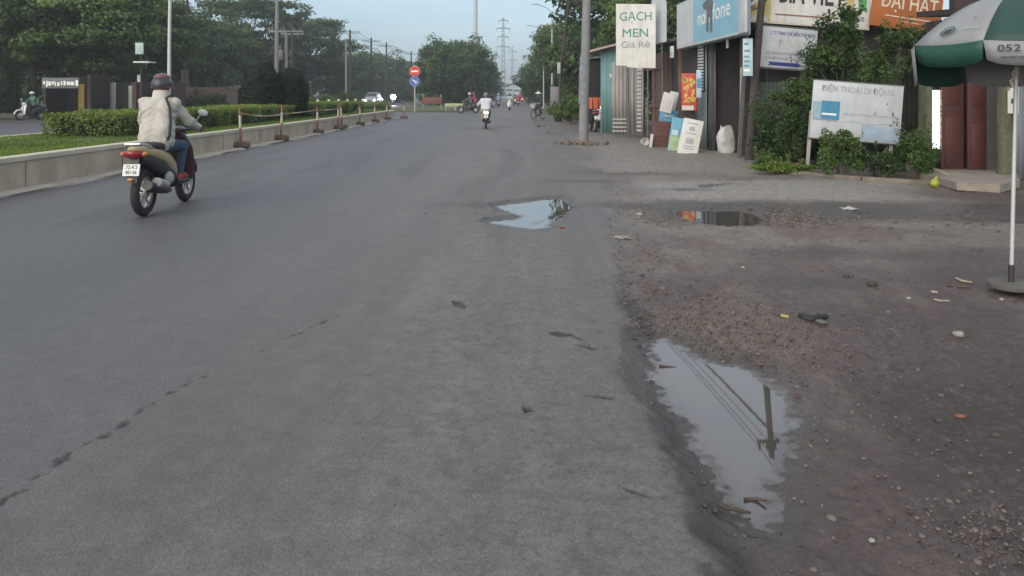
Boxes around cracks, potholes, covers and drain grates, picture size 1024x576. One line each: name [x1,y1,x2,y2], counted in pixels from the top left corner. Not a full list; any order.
pothole [616,322,912,539]
pothole [667,206,777,227]
crack [0,315,345,506]
pothole [478,194,647,236]
